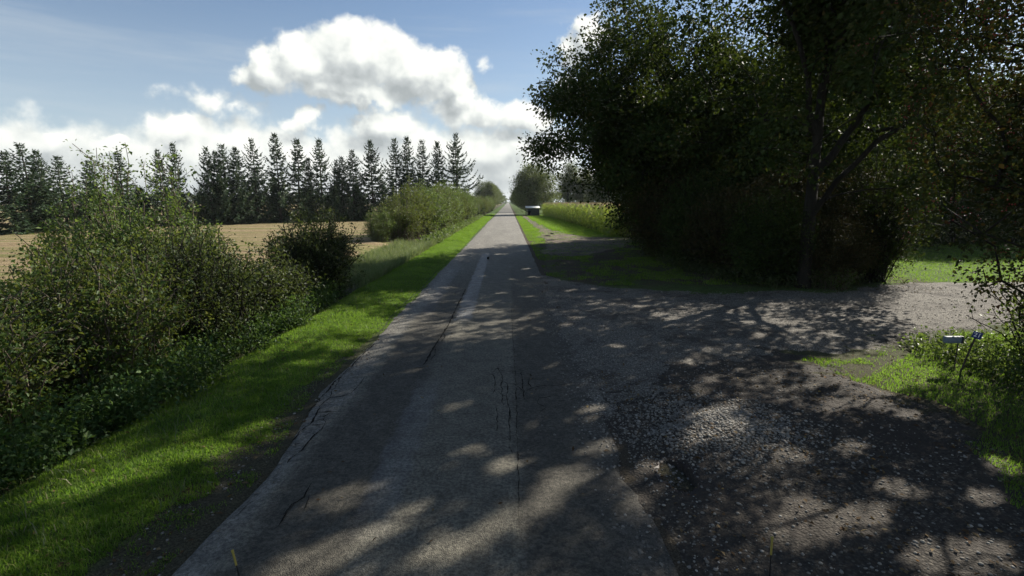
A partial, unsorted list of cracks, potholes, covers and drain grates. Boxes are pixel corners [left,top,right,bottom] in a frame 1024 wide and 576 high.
crack [287,344,374,463]
crack [492,368,565,454]
crack [279,484,311,525]
crack [415,289,466,369]
